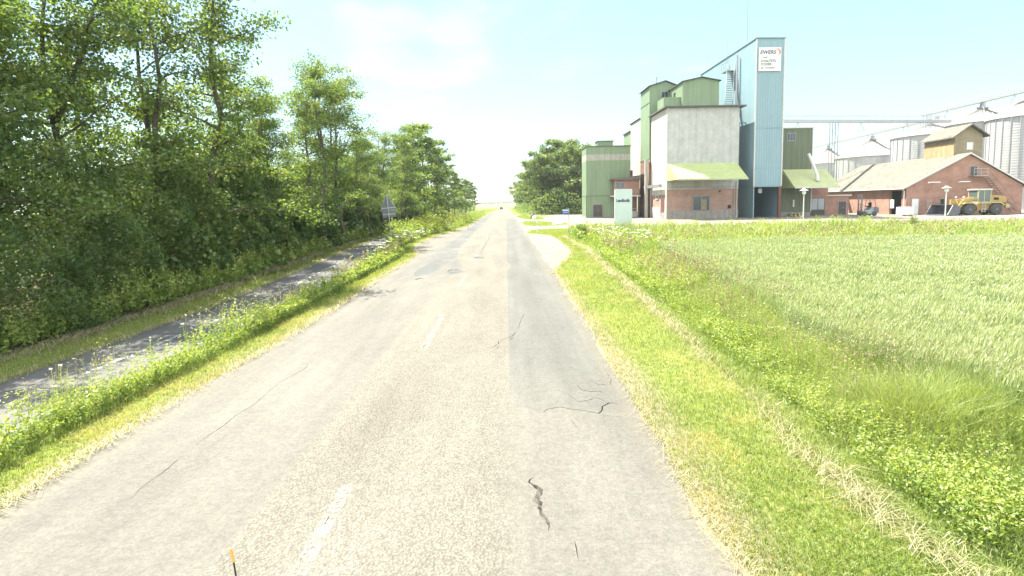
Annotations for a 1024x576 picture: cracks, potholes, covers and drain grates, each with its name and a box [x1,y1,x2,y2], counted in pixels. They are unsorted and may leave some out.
crack [517,373,620,425]
crack [137,366,307,492]
crack [528,476,550,530]
